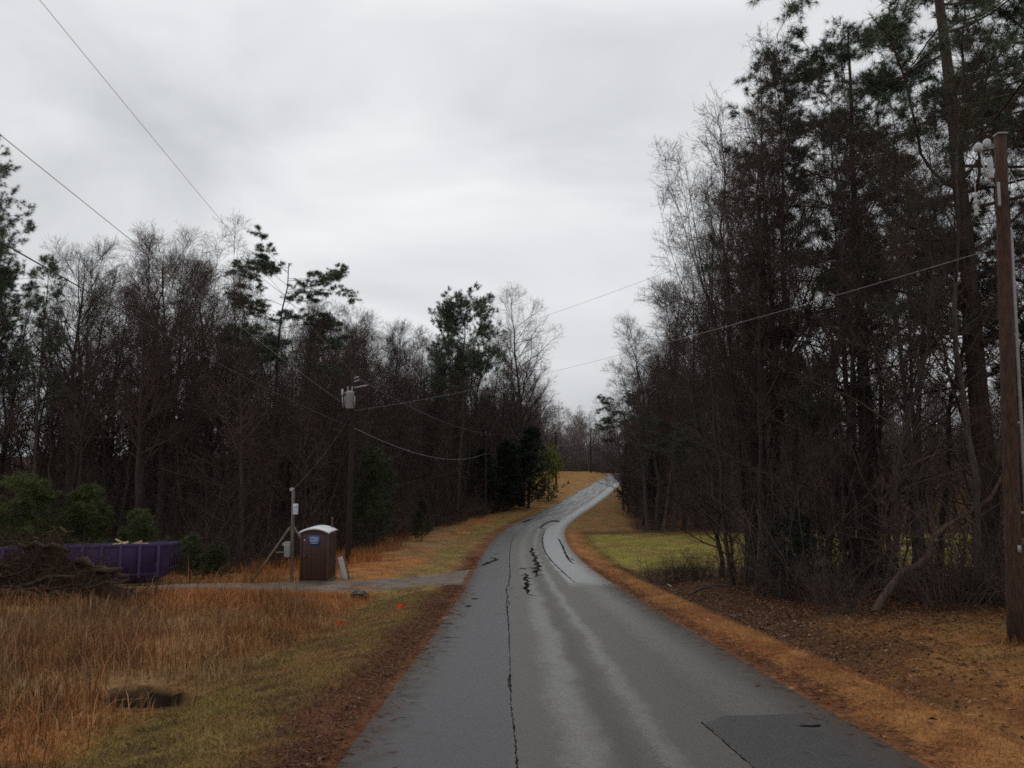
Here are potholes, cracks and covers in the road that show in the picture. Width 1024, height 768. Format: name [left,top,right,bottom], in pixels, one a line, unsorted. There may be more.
crack [517,531,575,597]
